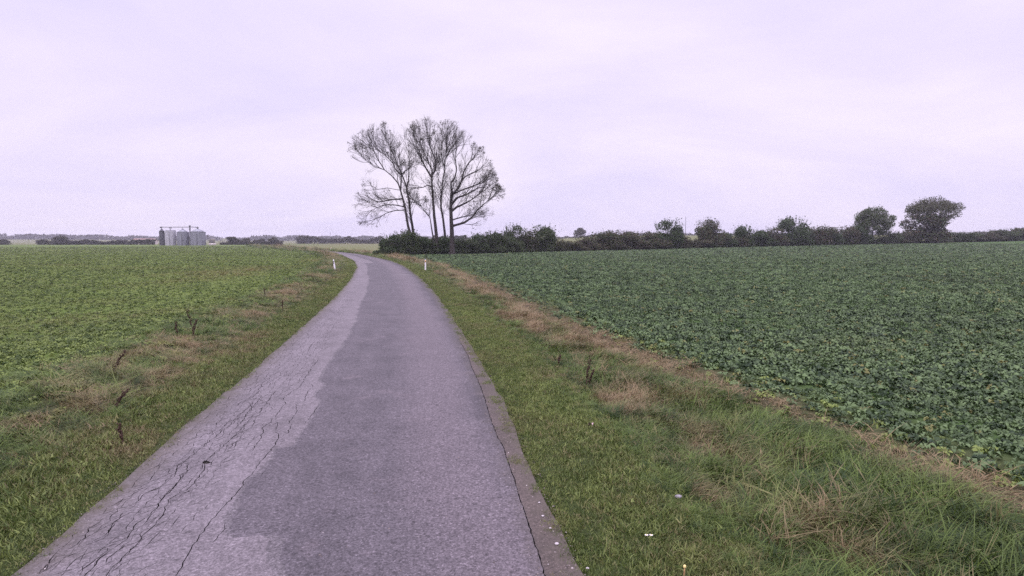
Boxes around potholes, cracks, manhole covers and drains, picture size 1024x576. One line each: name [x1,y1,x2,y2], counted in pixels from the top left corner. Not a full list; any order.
crack [39,287,355,576]
